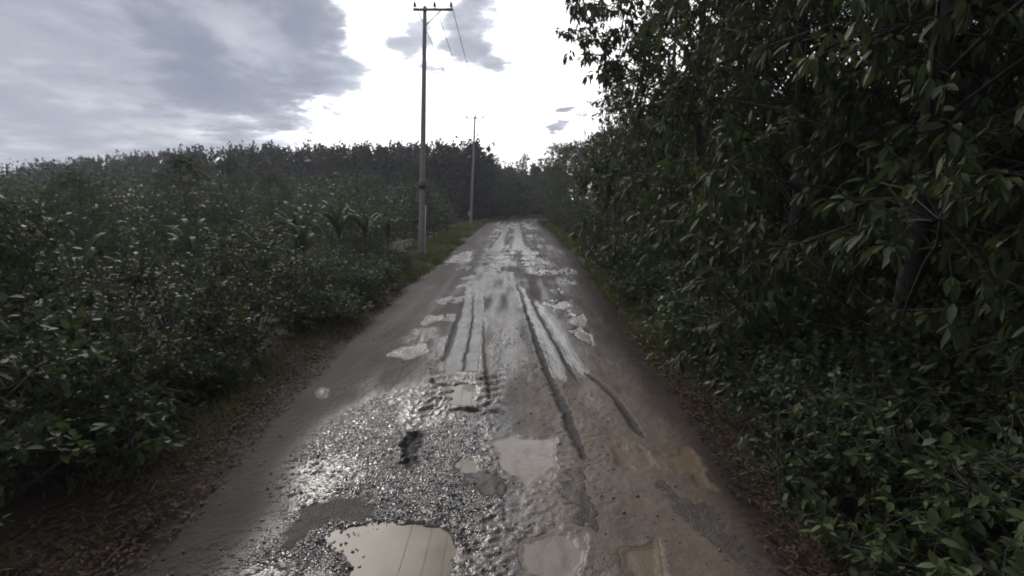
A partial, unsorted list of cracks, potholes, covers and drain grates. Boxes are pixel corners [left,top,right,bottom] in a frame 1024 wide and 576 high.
pothole [398,430,425,470]
pothole [452,457,479,474]
pothole [322,520,459,576]
